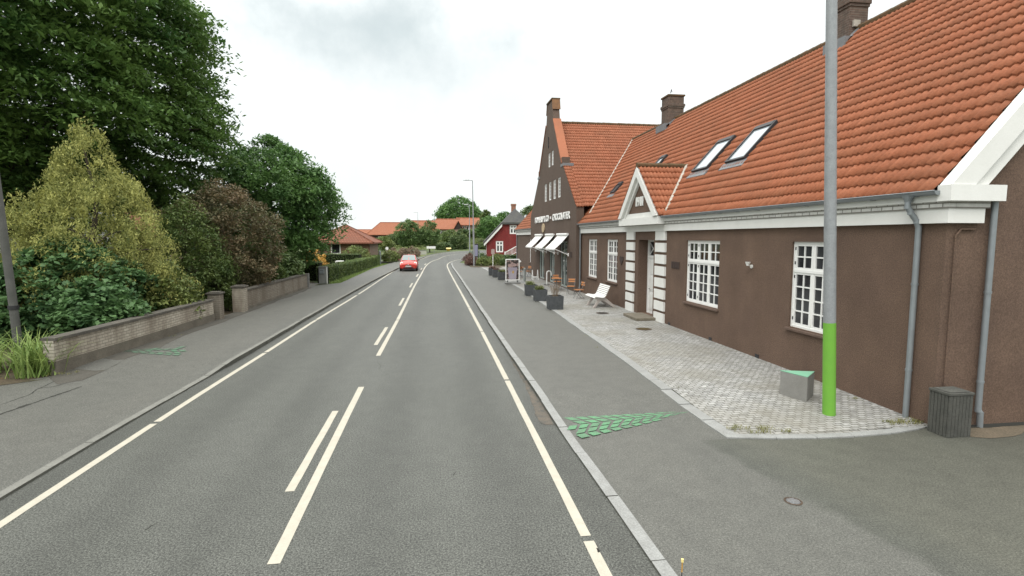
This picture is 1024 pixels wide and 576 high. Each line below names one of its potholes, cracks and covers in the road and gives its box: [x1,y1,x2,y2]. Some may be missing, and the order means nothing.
manhole cover [784,497,803,505]
